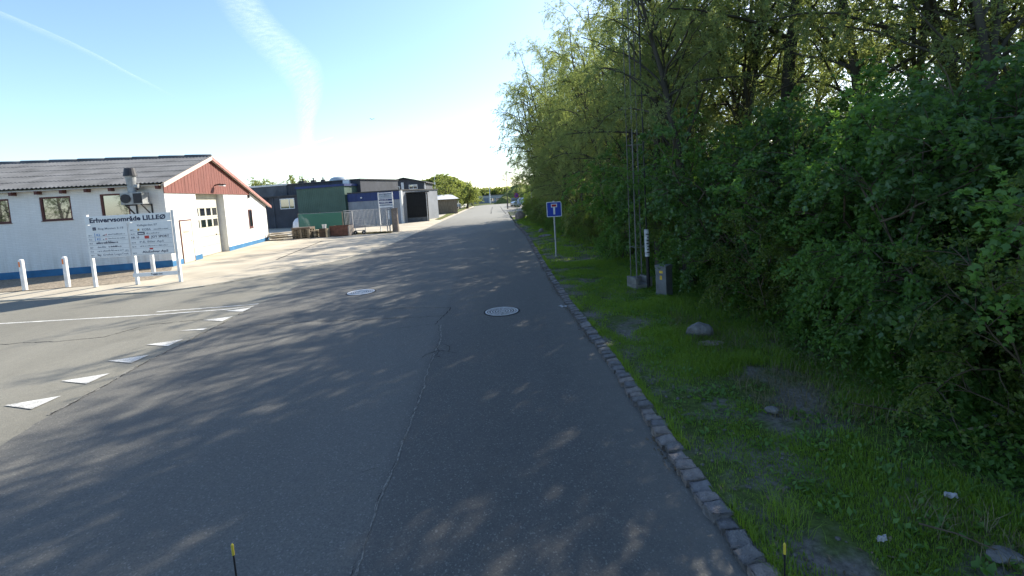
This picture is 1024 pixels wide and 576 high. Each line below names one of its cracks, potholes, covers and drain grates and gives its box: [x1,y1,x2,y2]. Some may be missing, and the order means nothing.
manhole cover [484,307,520,316]
crack [223,307,454,576]
